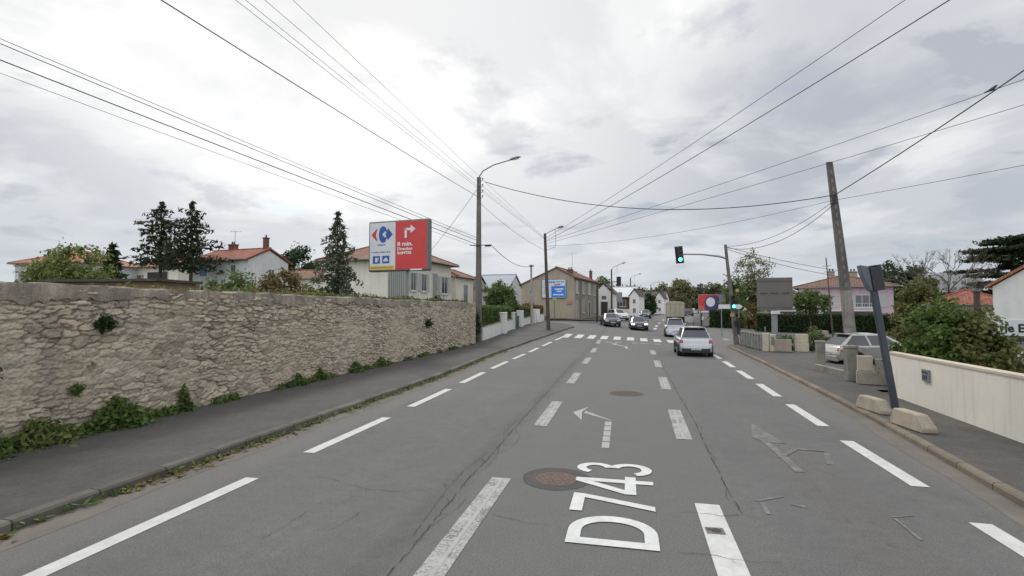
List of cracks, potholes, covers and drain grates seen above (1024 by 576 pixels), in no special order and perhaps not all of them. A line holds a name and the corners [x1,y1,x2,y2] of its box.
manhole cover [523,468,591,491]
crack [325,363,573,576]
